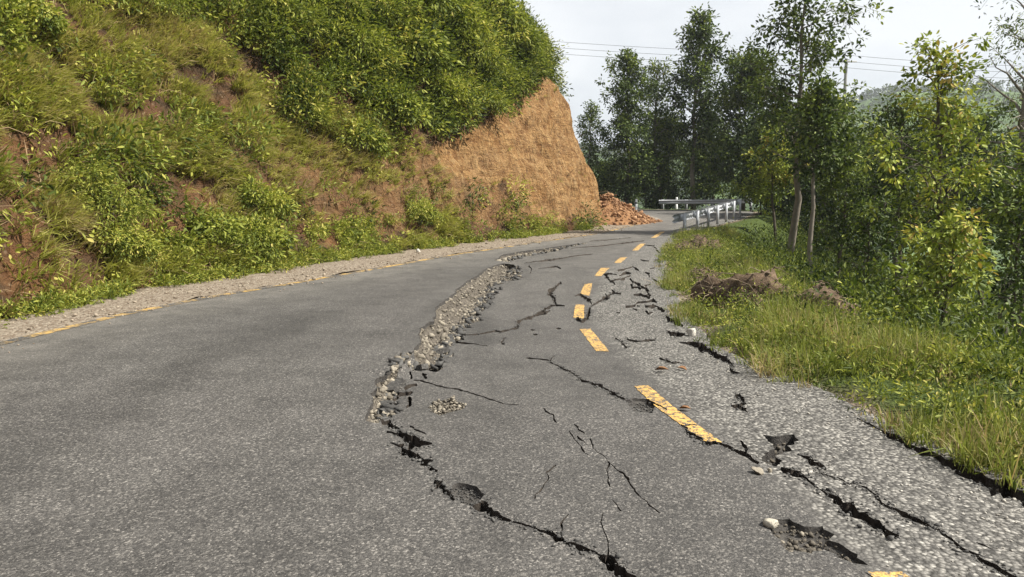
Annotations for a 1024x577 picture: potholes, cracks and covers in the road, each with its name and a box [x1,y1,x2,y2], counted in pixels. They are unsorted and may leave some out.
pothole [761,434,798,470]
crack [647,392,1024,577]
crack [365,237,740,577]
pothole [770,519,868,565]
pothole [449,483,485,507]
